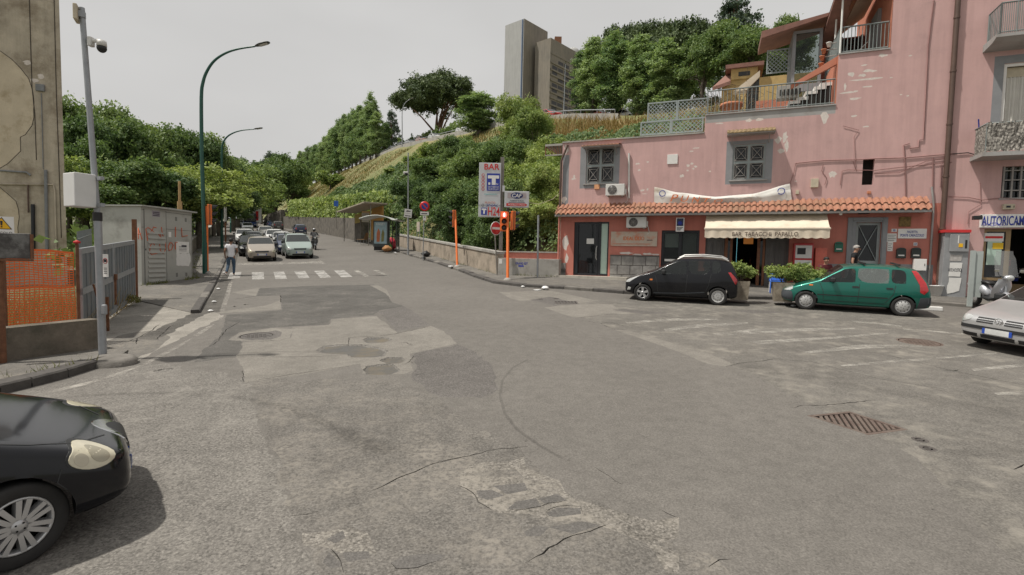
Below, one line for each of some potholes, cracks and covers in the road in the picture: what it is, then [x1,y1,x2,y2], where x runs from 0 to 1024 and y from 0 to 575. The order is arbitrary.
manhole cover [896,338,944,346]
crack [368,446,528,492]
pothole [363,364,400,375]
crack [509,500,608,561]
pothole [316,344,389,357]
